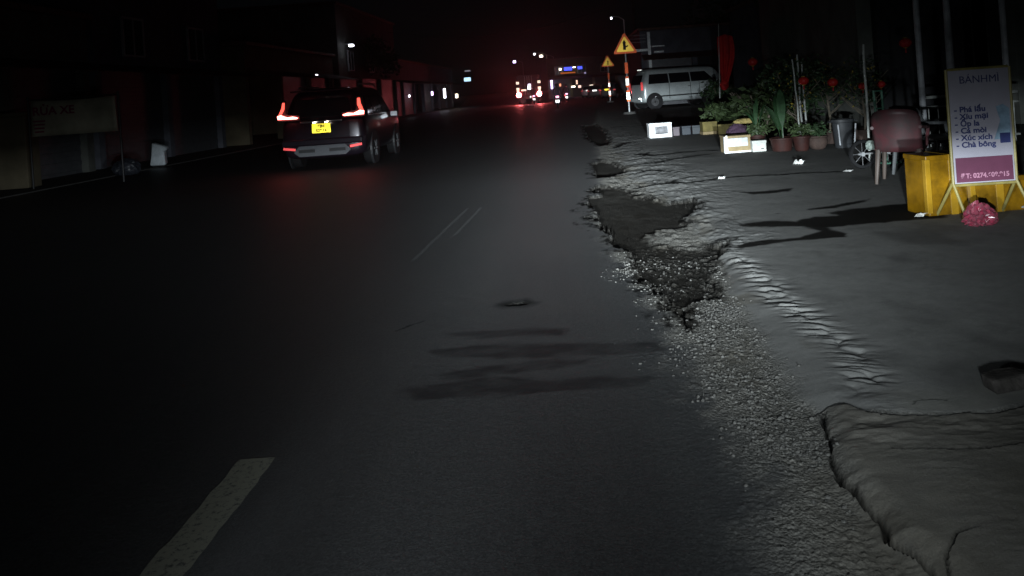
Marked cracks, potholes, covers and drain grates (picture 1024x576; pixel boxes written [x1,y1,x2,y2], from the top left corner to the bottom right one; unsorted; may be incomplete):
pothole [581,124,611,146]
pothole [582,185,732,332]
pothole [586,159,628,178]
crack [759,398,1024,576]
